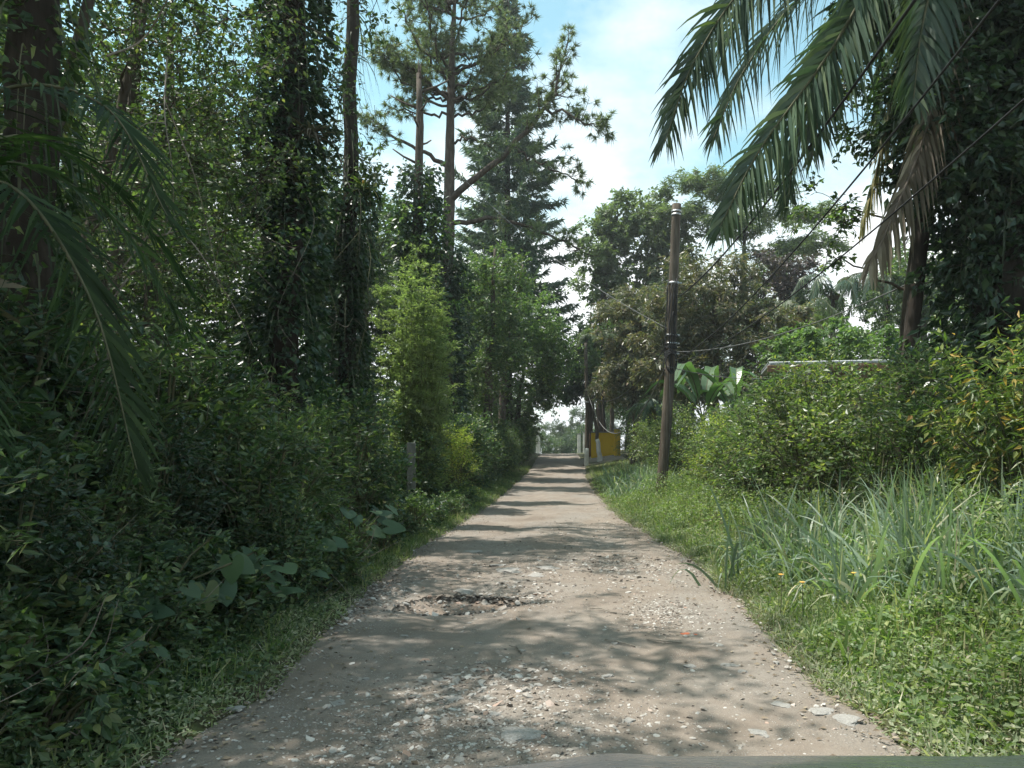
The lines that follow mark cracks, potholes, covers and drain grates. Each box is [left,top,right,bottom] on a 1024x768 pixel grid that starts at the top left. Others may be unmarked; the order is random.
pothole [388,593,527,616]
